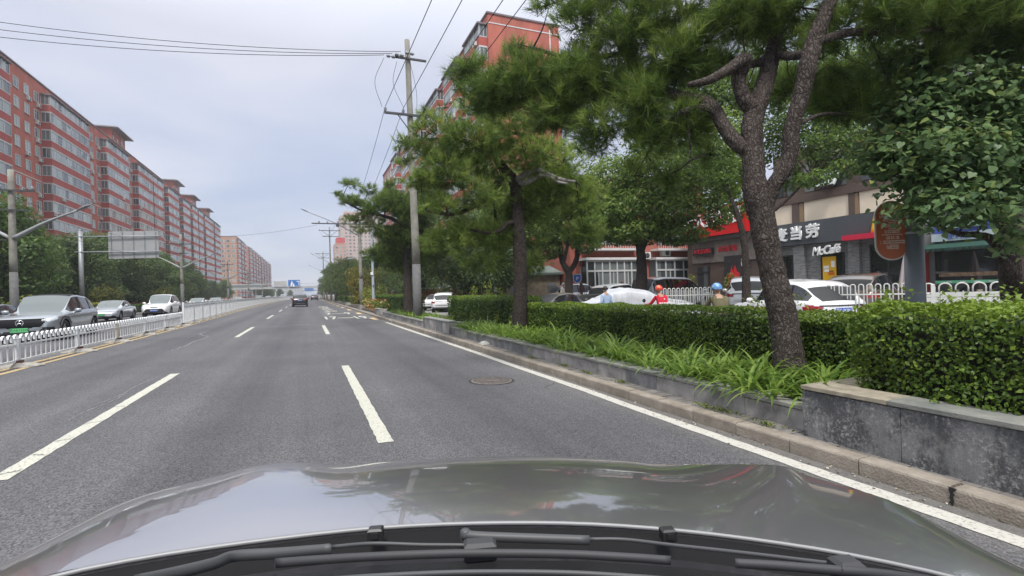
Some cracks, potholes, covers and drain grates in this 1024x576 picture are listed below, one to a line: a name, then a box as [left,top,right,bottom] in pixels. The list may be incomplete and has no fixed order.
manhole cover [469,377,515,385]
